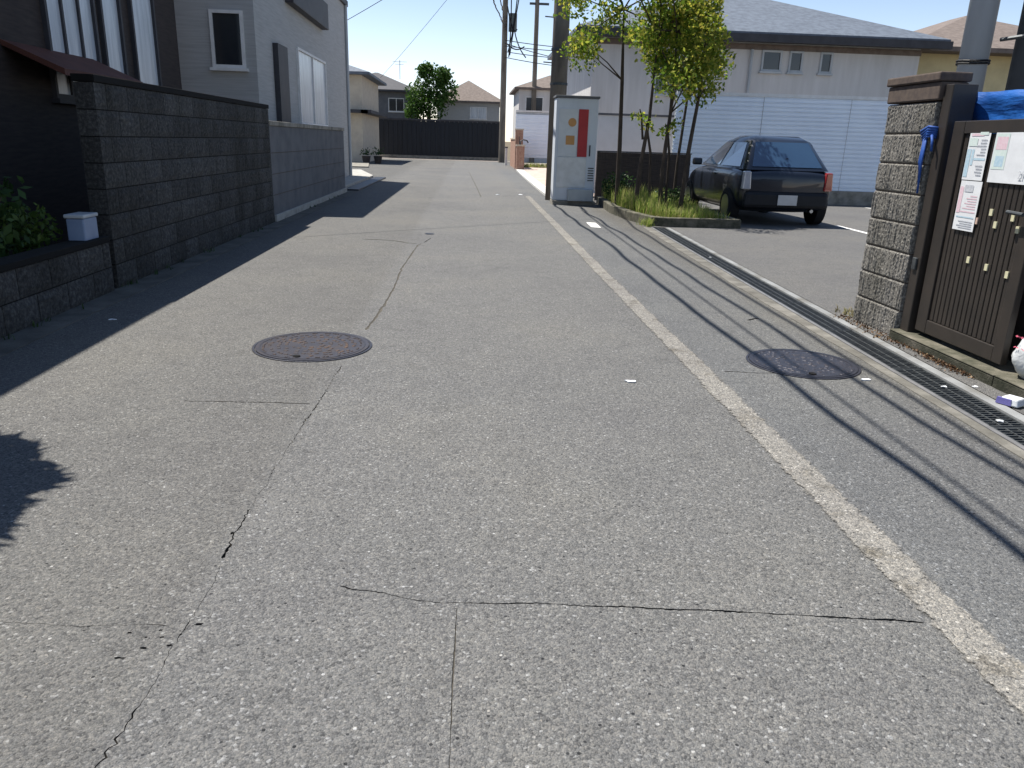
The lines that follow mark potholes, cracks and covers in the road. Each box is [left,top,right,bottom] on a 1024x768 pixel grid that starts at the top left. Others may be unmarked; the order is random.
crack [365,238,431,330]
crack [6,366,342,768]
manhole cover [252,332,372,362]
manhole cover [746,349,861,380]
crack [341,586,925,768]
